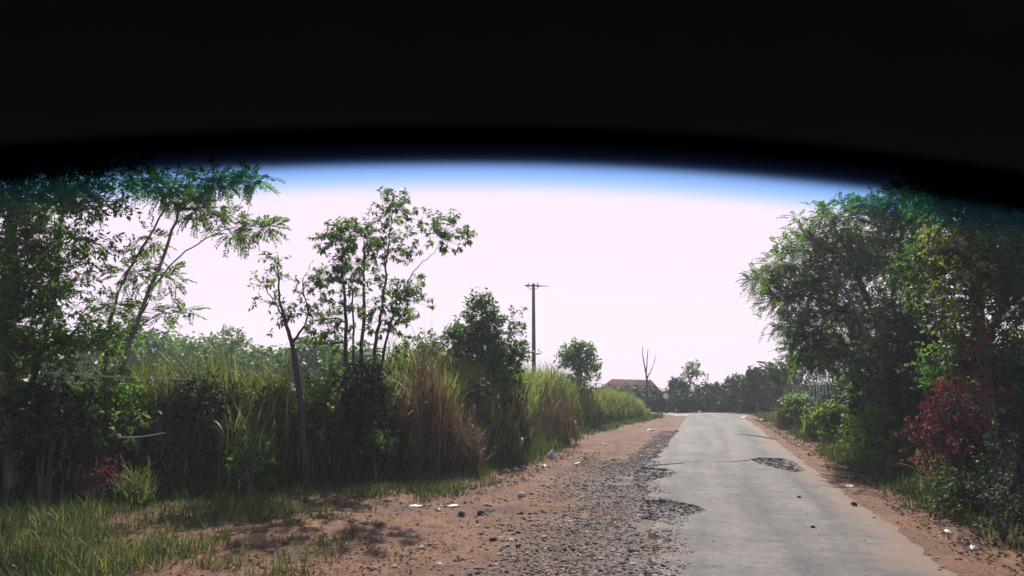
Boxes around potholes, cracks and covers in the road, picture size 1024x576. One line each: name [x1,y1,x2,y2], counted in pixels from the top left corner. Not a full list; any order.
pothole [635,500,705,521]
pothole [630,467,677,484]
pothole [750,457,806,473]
